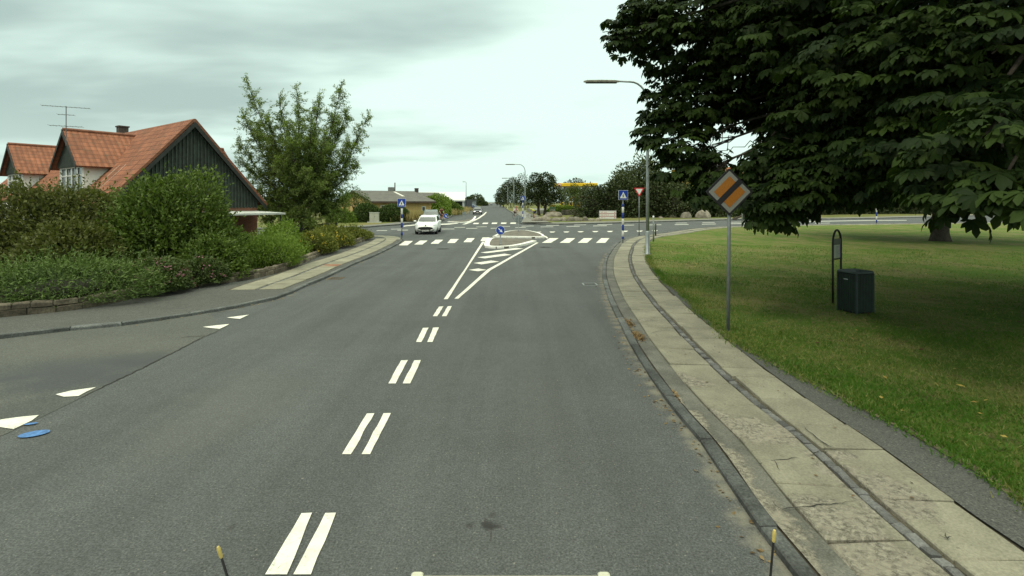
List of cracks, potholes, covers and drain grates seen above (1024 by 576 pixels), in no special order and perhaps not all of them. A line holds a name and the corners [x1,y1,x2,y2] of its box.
crack [754,428,847,469]
